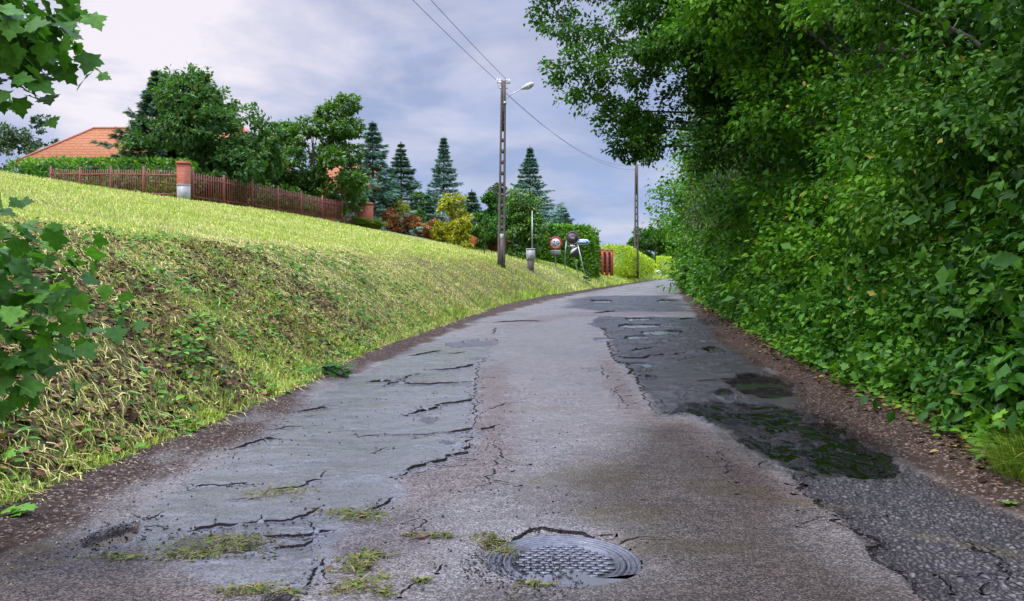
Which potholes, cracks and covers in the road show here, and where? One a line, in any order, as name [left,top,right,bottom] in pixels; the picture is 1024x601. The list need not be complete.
crack [229,403,335,450]
crack [394,563,448,597]
crack [932,527,1024,595]
crack [580,310,688,415]
crack [362,497,432,534]
crack [141,469,336,589]
pothole [74,518,150,553]
pothole [711,387,739,395]
pothole [657,399,909,483]
crack [358,350,532,492]
pothole [442,338,502,347]
manhole cover [487,535,642,580]
